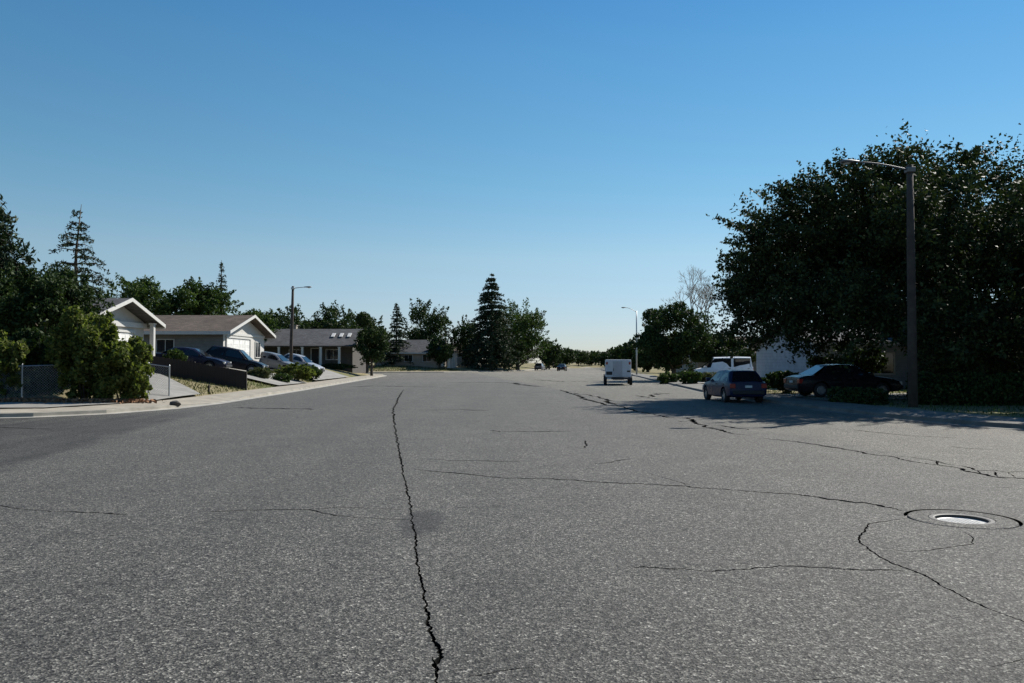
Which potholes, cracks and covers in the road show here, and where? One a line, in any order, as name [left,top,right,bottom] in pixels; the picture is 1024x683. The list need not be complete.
crack [0,386,1024,683]
manhole cover [905,510,1022,529]
